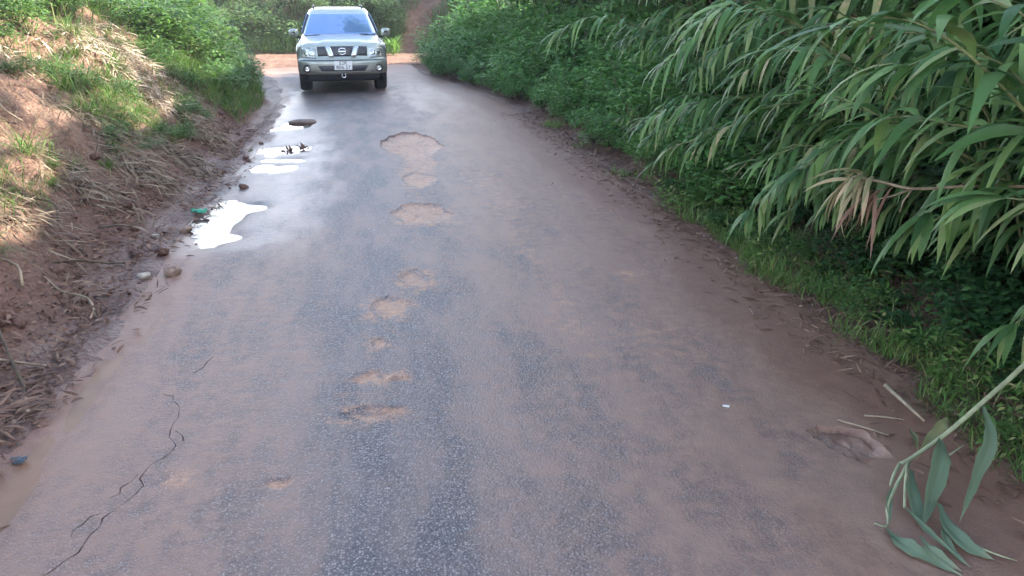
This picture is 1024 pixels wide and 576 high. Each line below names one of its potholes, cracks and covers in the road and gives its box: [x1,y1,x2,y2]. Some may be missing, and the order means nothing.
crack [43,394,184,576]
pothole [390,202,457,225]
pothole [346,369,386,386]
pothole [397,268,432,288]
pothole [401,171,439,188]
pothole [332,404,409,423]
pothole [371,338,390,349]
pothole [368,295,412,324]
pothole [380,132,445,160]
